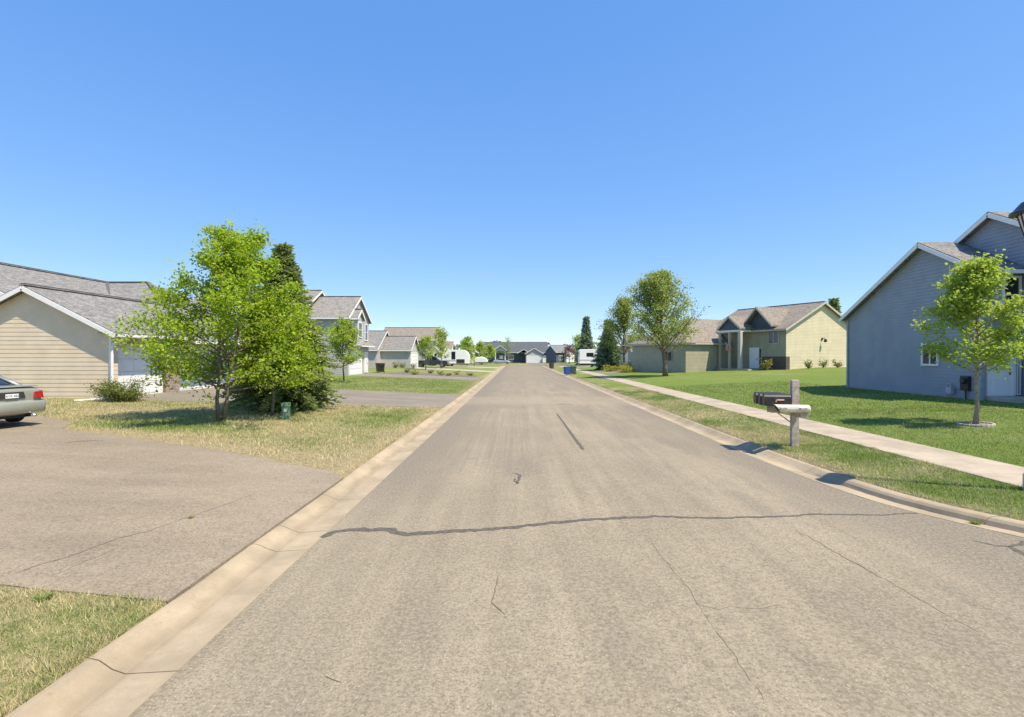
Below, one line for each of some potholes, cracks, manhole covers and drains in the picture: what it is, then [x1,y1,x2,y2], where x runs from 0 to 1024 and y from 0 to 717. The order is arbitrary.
crack [652,542,780,699]
crack [799,532,978,632]
crack [22,494,252,572]
